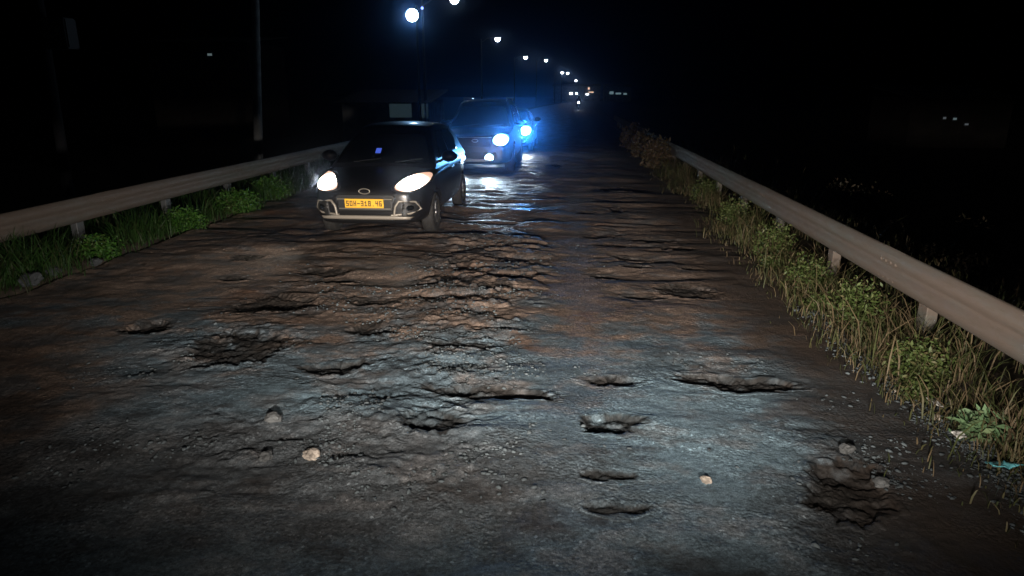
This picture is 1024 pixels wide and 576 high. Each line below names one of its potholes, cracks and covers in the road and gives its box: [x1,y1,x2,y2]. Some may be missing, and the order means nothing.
pothole [572,409,658,439]
crack [439,257,541,291]
pothole [658,372,817,396]
pothole [108,317,181,337]
pothole [222,292,321,315]
pothole [570,373,654,389]
pothole [645,282,726,301]
pothole [393,408,481,440]
pothole [408,381,567,402]
pothole [790,451,911,537]
pothole [177,327,302,372]
pothole [289,357,382,378]
